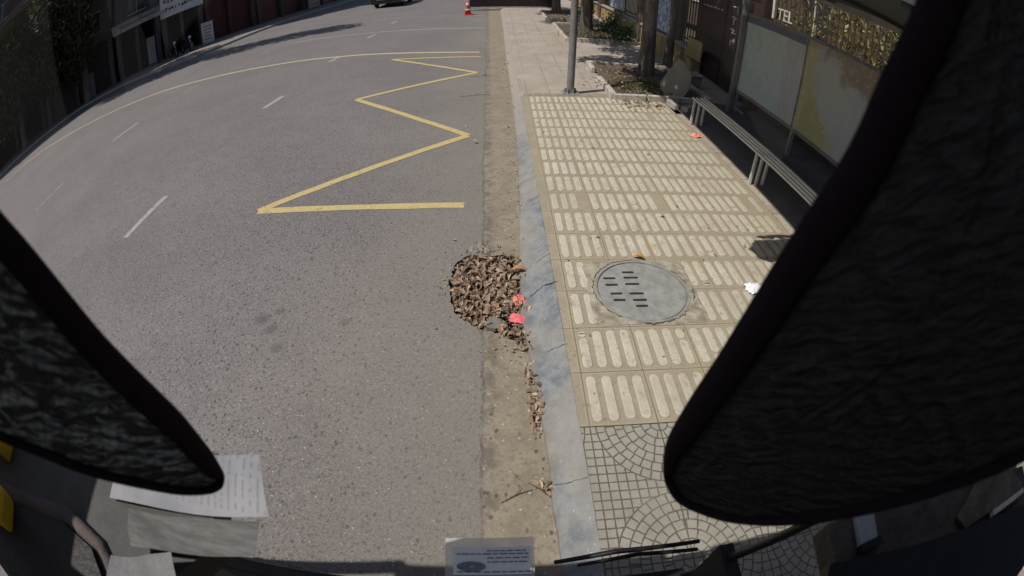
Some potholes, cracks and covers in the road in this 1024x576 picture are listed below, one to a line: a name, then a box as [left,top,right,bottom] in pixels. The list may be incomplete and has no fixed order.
pothole [441,241,521,340]
manhole cover [582,260,710,326]
